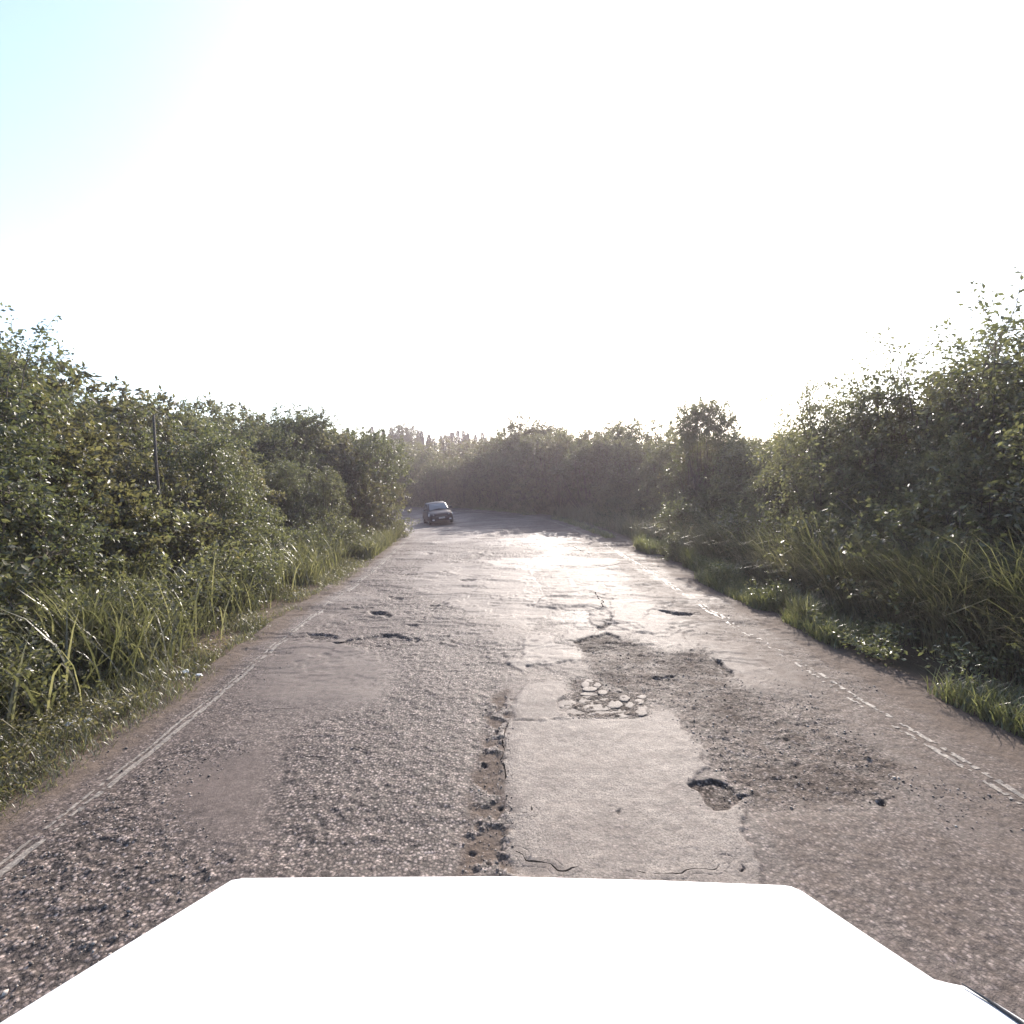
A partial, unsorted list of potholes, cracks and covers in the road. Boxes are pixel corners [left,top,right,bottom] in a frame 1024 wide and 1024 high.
crack [512,847,584,877]
crack [625,853,731,880]
crack [585,590,617,613]
pothole [475,761,494,773]
pothole [648,607,705,618]
pothole [318,632,426,652]
pothole [488,801,511,817]
pothole [301,631,347,642]
pothole [475,746,494,760]
pothole [679,775,756,815]
pothole [459,846,485,862]
pothole [363,610,401,620]
